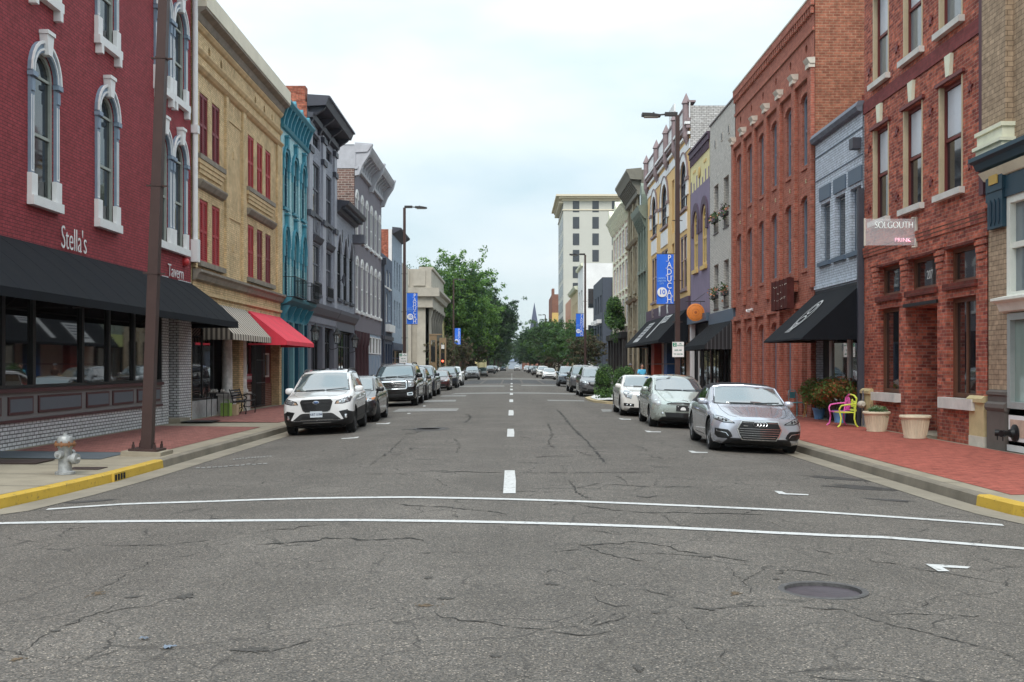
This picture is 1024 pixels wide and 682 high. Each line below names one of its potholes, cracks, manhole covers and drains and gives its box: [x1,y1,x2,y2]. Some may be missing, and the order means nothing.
crack [438,530,858,635]
crack [19,540,230,654]
crack [856,597,1018,658]
manhole cover [778,581,869,602]
crack [262,524,479,553]
drain grate [111,470,126,482]
crack [499,425,781,527]
